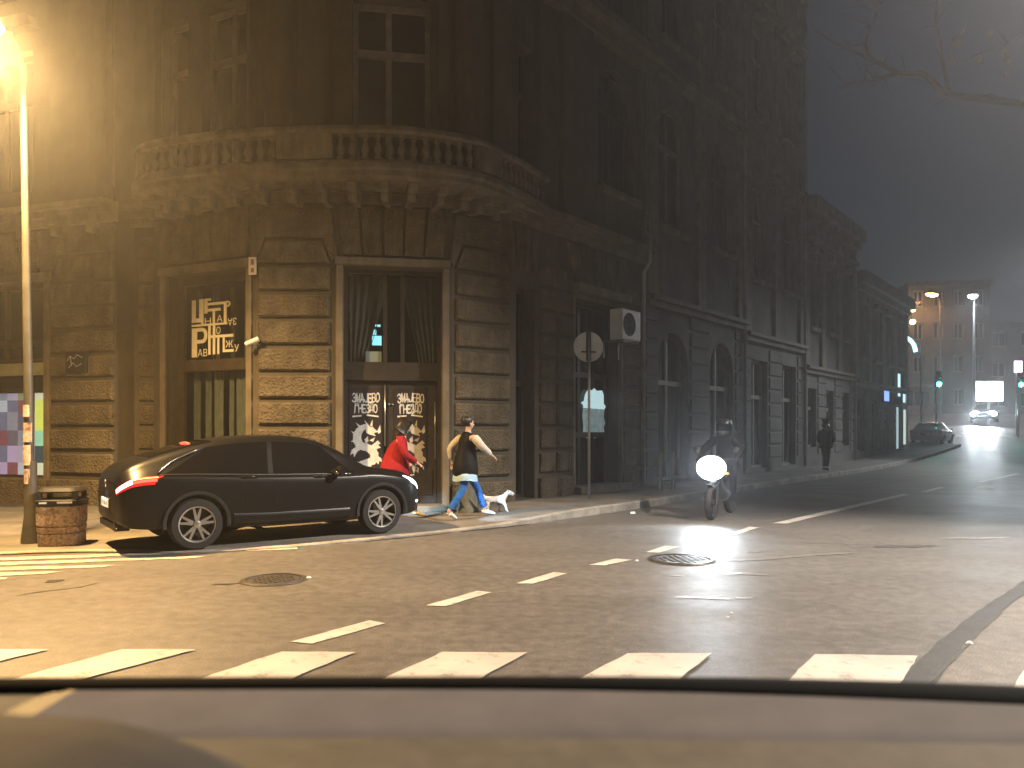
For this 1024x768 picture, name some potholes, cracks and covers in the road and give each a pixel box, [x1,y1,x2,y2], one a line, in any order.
manhole cover [240,573,308,586]
manhole cover [647,553,718,566]
